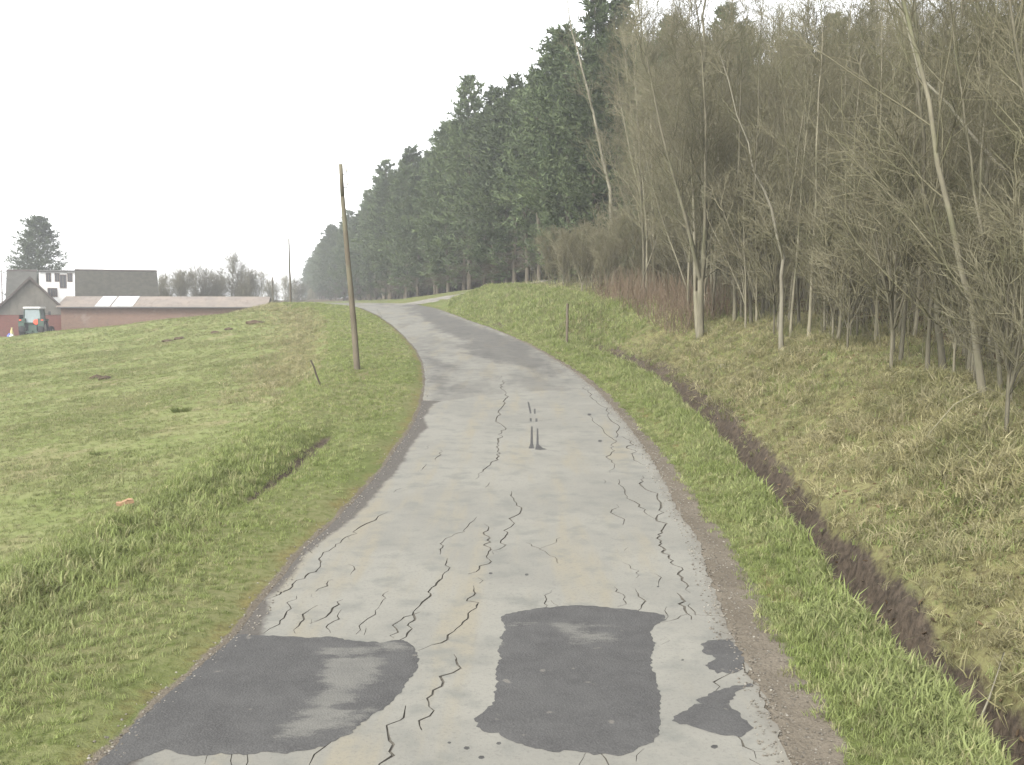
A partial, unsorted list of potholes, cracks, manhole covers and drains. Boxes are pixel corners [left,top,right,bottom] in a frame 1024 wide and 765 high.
crack [713,663,768,710]
crack [737,736,765,765]
crack [582,385,715,644]
crack [264,491,558,765]
crack [476,378,542,487]
